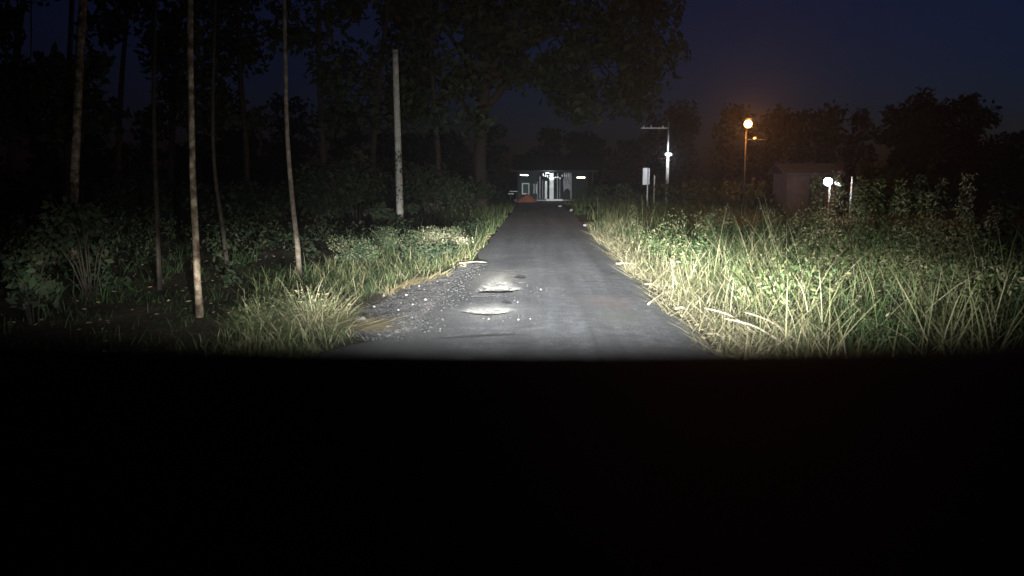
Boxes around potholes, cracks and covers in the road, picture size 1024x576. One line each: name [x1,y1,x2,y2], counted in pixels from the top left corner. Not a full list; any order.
pothole [456,304,517,316]
pothole [474,273,525,293]
